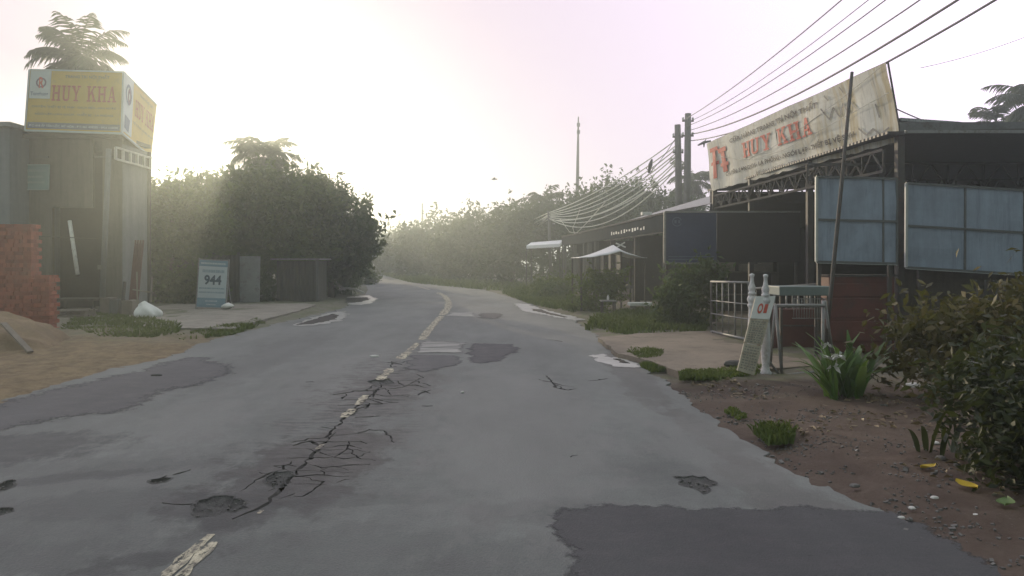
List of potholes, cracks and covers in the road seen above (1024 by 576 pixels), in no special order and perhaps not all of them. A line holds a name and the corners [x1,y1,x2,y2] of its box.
pothole [146,475,173,485]
pothole [190,495,251,518]
pothole [673,475,718,494]
crack [233,361,430,519]
crack [539,376,572,390]
pothole [0,479,17,491]
